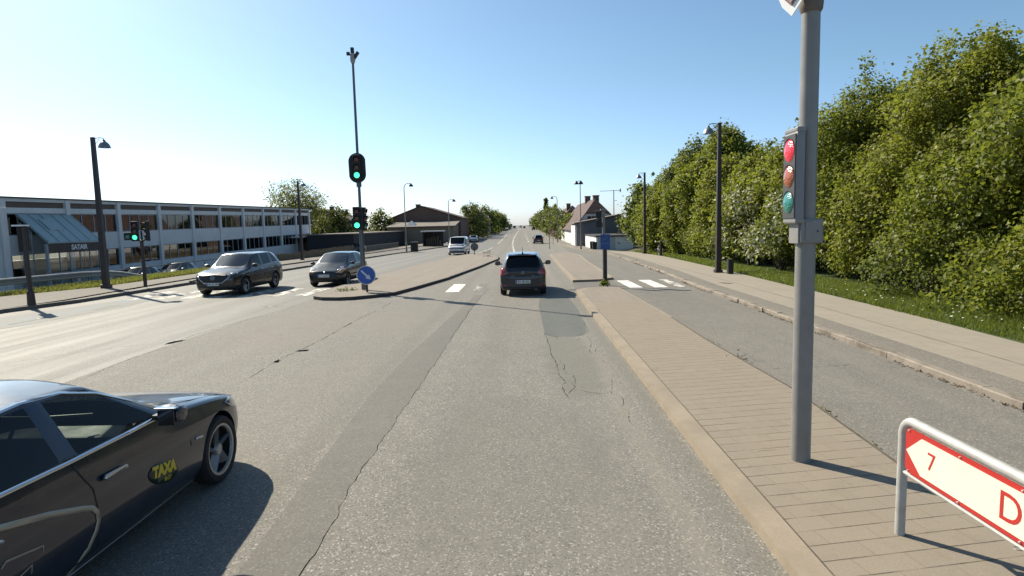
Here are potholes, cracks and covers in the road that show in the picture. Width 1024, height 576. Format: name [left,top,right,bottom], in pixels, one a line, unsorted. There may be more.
crack [544,323,635,426]
